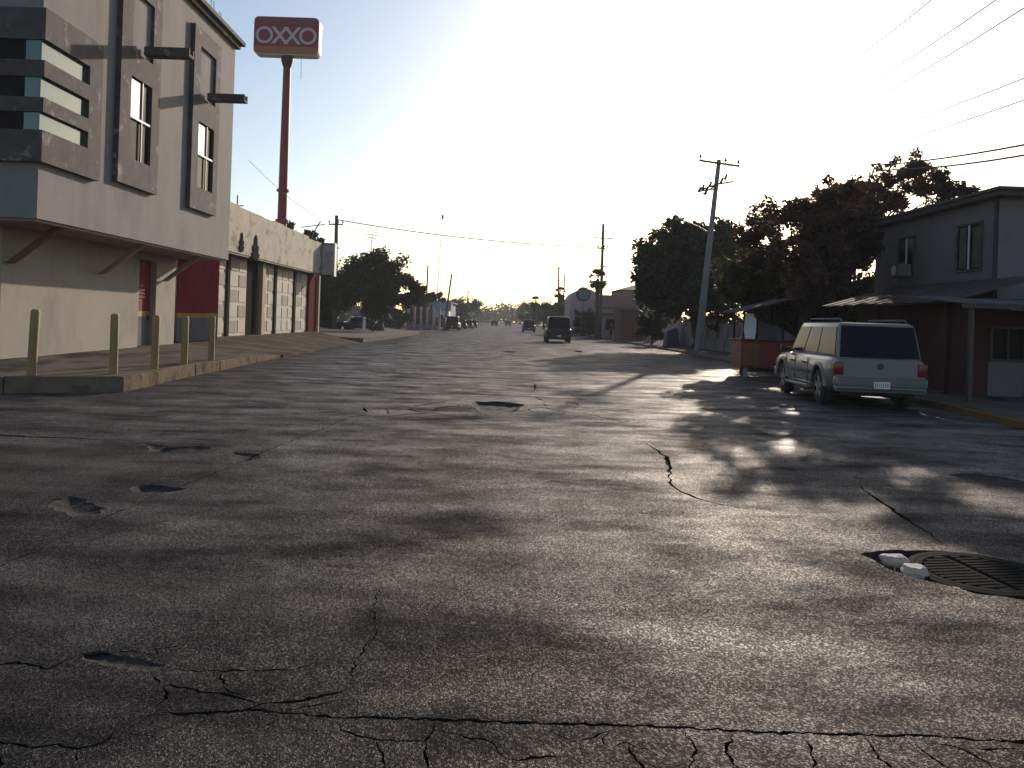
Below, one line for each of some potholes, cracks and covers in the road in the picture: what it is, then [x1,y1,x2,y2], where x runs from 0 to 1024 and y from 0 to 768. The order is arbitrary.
pothole [472,401,525,415]
manhole cover [908,551,1024,600]
crack [0,589,1024,768]
pothole [48,496,106,517]
pothole [229,452,261,464]
pothole [144,443,212,453]
crack [646,443,750,510]
crack [860,485,941,543]
pothole [78,651,165,672]
